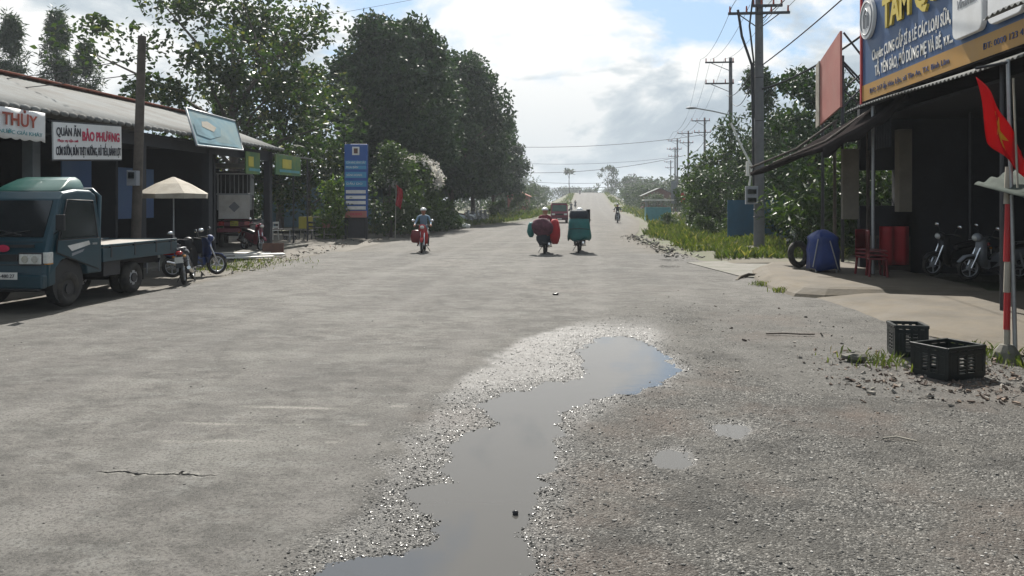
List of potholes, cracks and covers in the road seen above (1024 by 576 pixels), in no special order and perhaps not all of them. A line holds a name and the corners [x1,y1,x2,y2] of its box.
pothole [644,446,697,469]
pothole [311,336,687,576]
pothole [707,419,753,439]
